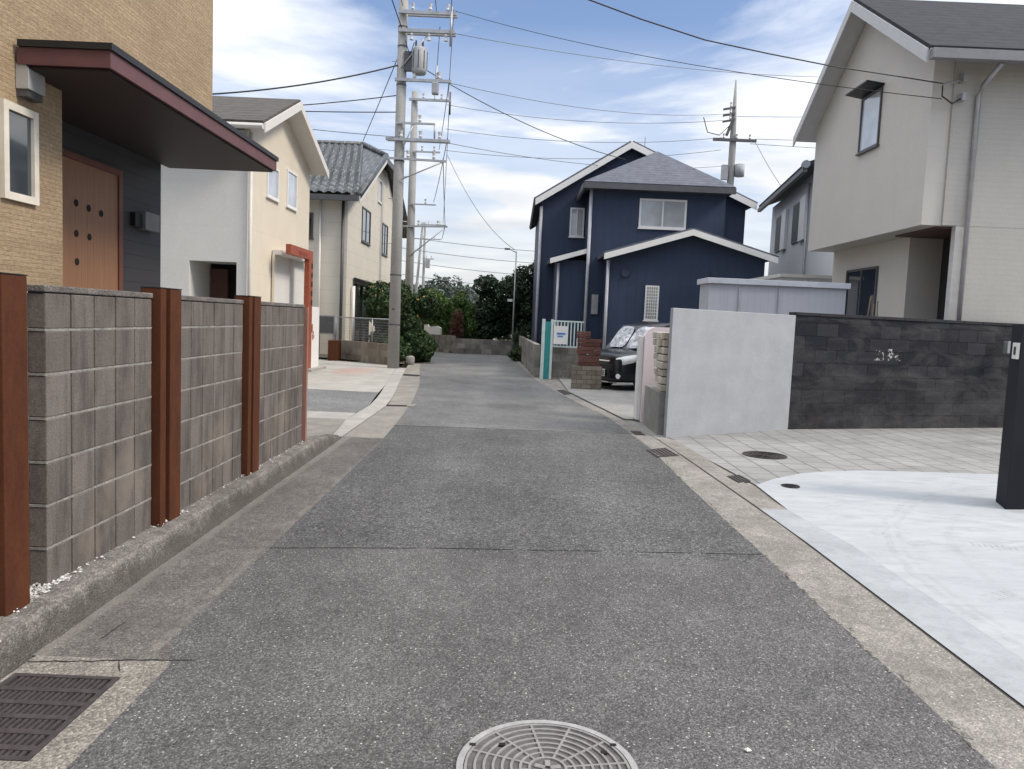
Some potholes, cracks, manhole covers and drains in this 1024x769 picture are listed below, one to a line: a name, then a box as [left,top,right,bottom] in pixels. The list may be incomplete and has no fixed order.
manhole cover [742,451,787,460]
drain grate [727,475,750,483]
drain grate [0,673,121,762]
drain grate [646,448,679,458]
manhole cover [456,720,638,769]
